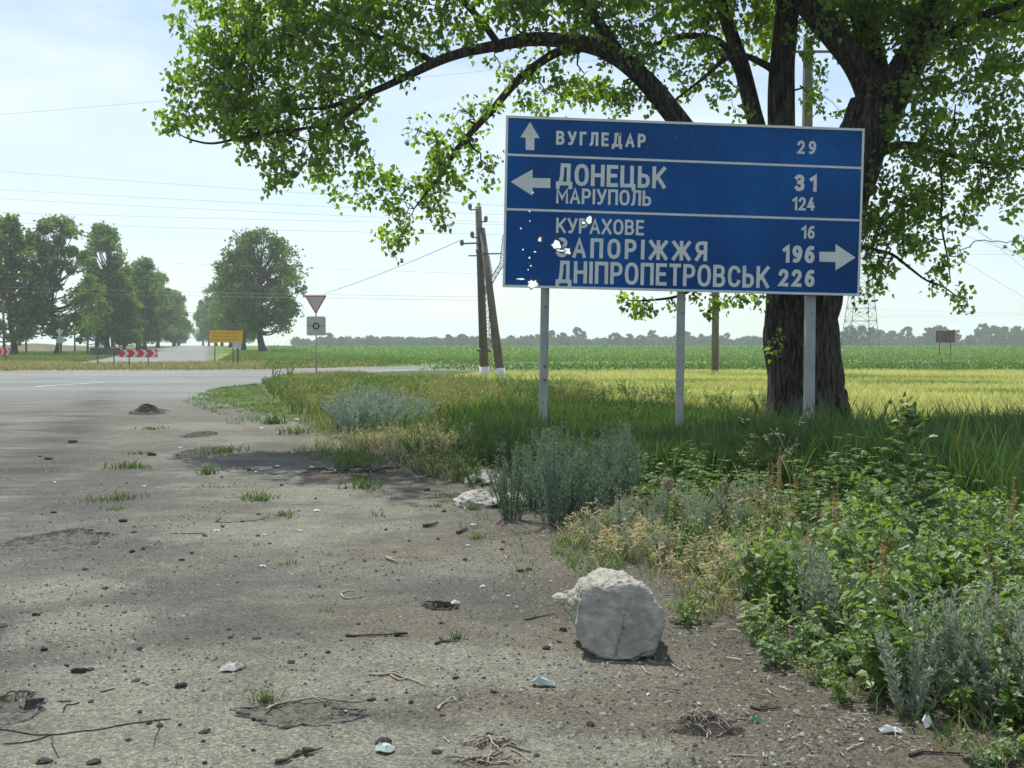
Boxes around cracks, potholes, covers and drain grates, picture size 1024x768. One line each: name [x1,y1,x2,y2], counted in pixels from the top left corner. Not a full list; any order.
pothole [0,689,48,729]
pothole [0,527,120,553]
pothole [232,701,370,729]
pothole [420,600,459,611]
